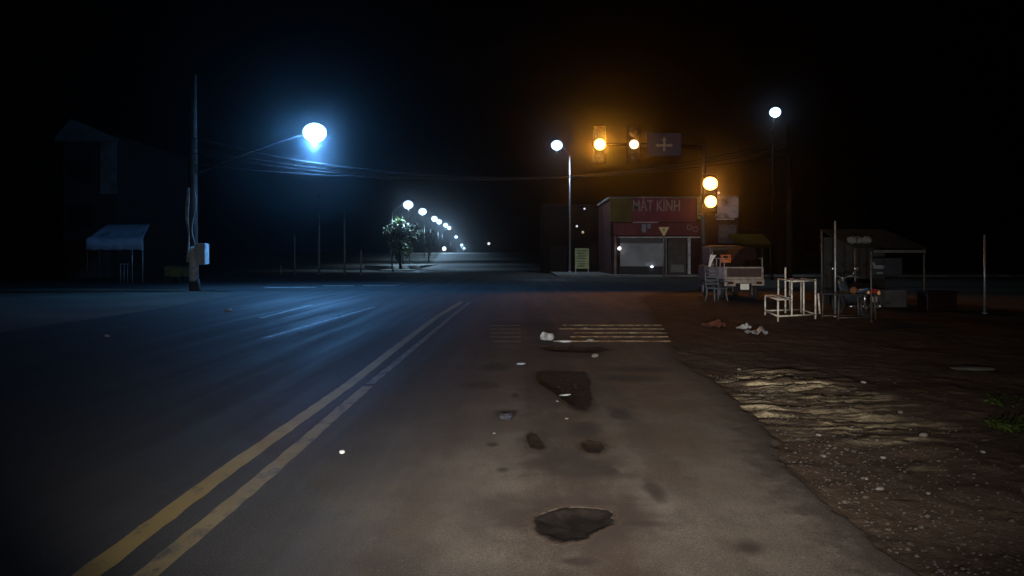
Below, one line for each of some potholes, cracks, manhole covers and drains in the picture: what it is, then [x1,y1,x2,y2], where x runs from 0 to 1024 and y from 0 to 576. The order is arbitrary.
pothole [534,368,595,412]
pothole [519,430,549,452]
pothole [522,504,623,547]
pothole [534,345,614,353]
pothole [575,438,611,456]
